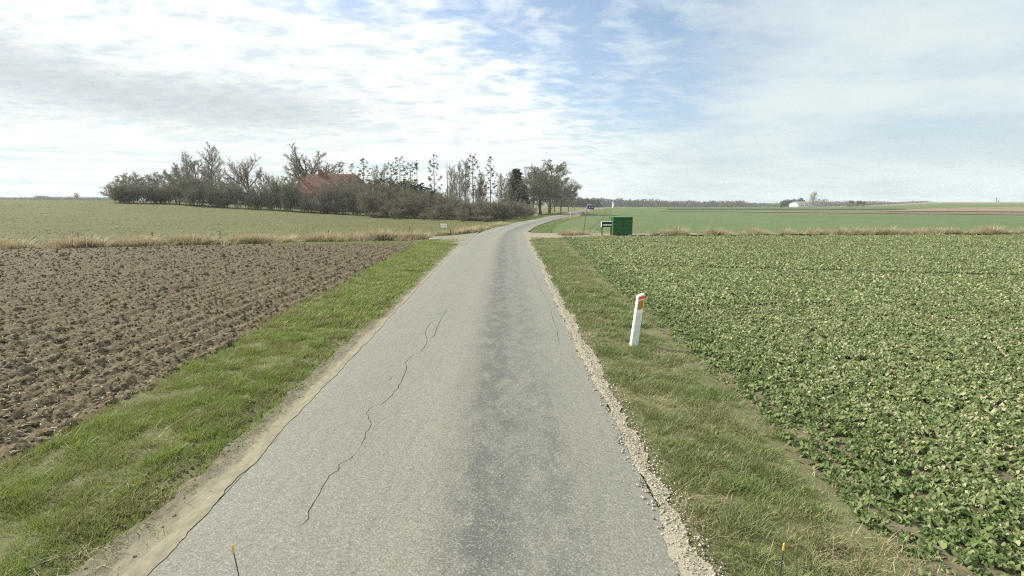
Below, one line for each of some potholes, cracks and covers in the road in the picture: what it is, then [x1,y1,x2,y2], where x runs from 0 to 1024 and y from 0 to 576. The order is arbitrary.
crack [297,311,446,531]
